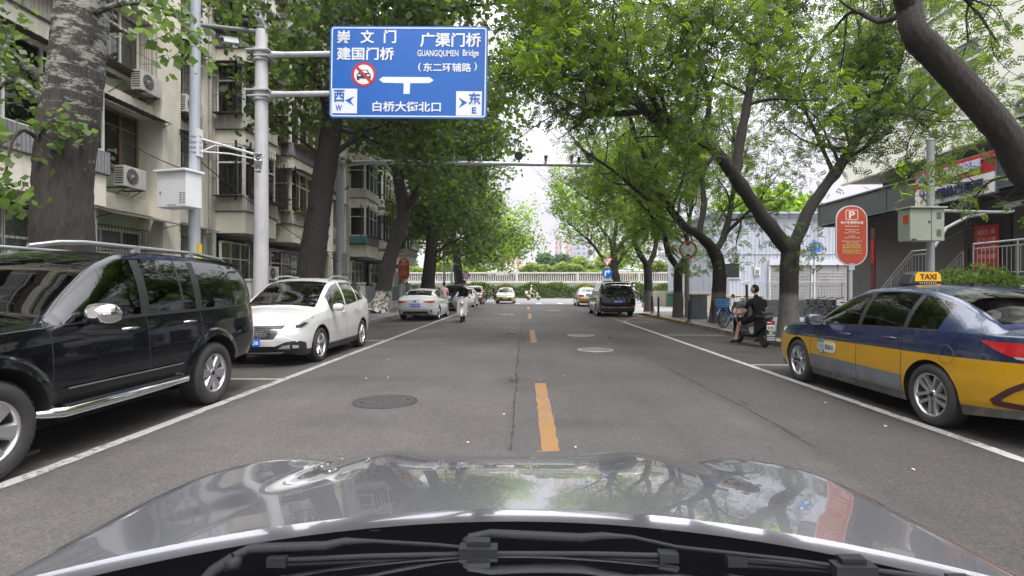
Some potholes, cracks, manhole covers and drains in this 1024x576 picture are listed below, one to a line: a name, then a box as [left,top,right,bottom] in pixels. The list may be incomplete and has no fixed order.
manhole cover [352,394,418,409]
